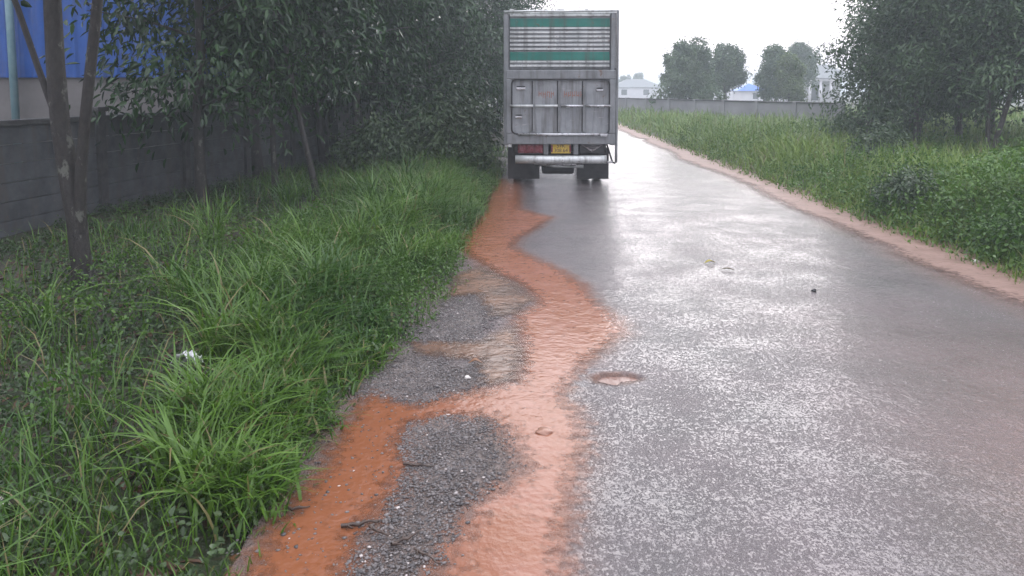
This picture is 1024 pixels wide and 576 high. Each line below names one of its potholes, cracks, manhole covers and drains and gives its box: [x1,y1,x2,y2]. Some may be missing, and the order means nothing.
pothole [562,368,663,391]
